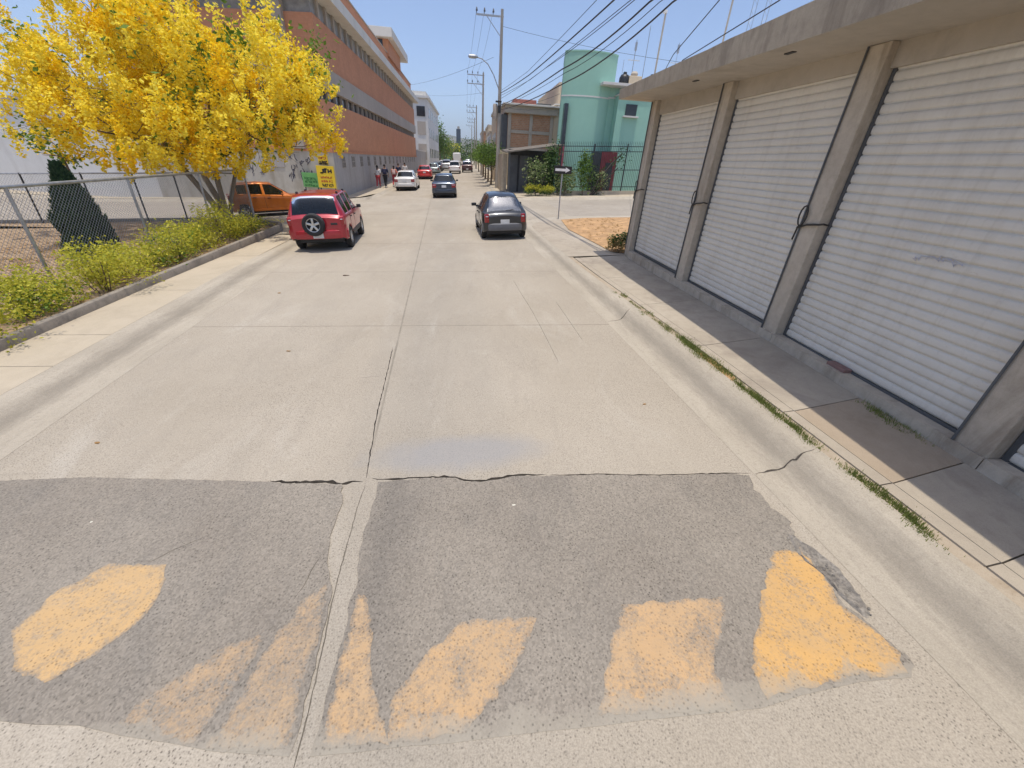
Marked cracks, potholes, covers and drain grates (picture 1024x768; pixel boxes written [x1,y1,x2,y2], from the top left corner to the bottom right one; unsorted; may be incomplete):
crack [271,348,544,767]
crack [755,449,815,475]
